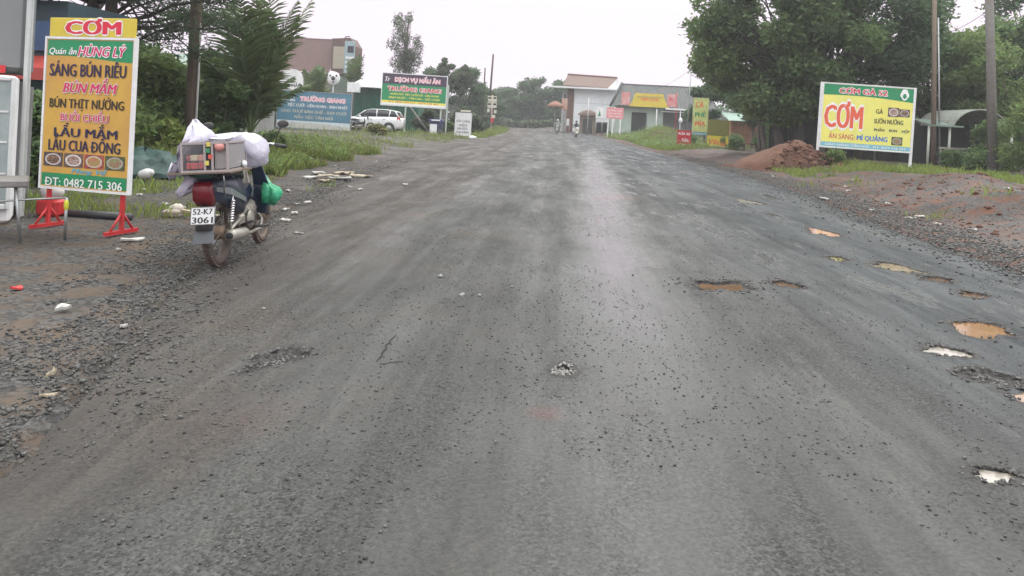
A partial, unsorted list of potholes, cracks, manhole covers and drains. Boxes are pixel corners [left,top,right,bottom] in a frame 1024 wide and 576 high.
pothole [911,341,986,362]
pothole [761,277,817,291]
pothole [951,456,1024,492]
pothole [226,342,325,380]
pothole [800,226,854,239]
pothole [937,317,1024,347]
pothole [941,364,1024,395]
crack [376,334,397,364]
pothole [908,274,963,286]
pothole [632,272,785,299]
